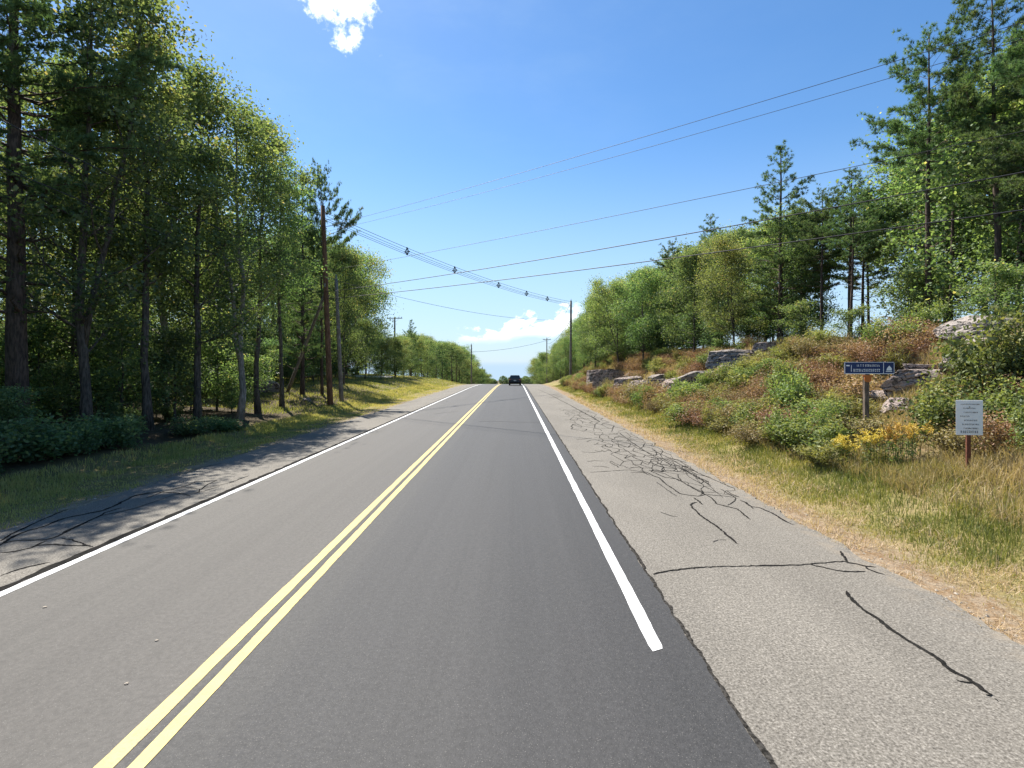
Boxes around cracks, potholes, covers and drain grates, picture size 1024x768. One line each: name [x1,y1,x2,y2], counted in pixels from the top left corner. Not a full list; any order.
crack [846,591,997,700]
crack [540,390,791,544]
crack [654,551,885,575]
crack [0,463,247,575]
